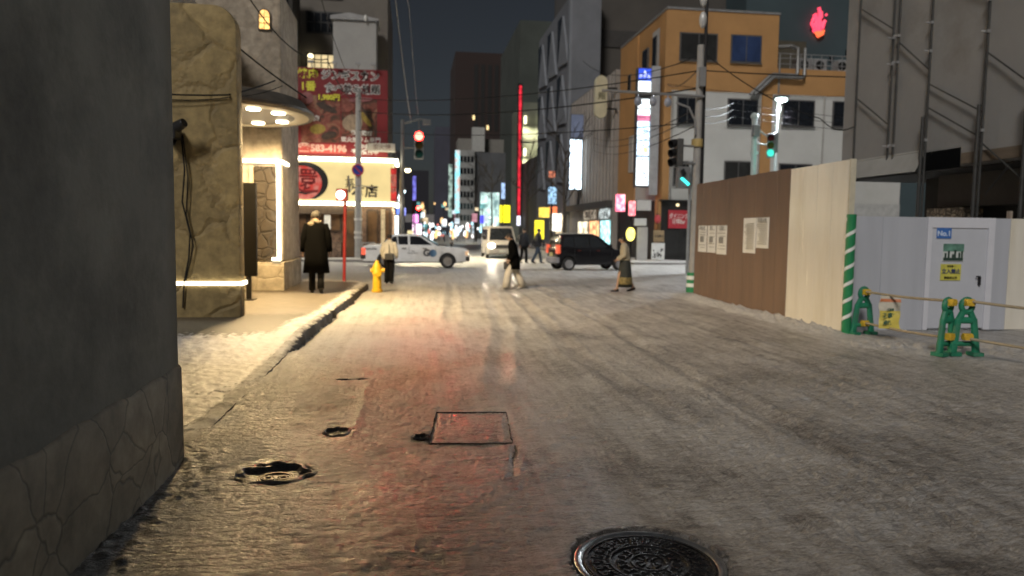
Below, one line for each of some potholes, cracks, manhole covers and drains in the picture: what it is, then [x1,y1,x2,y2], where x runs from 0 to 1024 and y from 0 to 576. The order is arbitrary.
pothole [229,463,318,485]
manhole cover [428,412,513,445]
pothole [321,427,351,437]
manhole cover [574,531,727,576]
